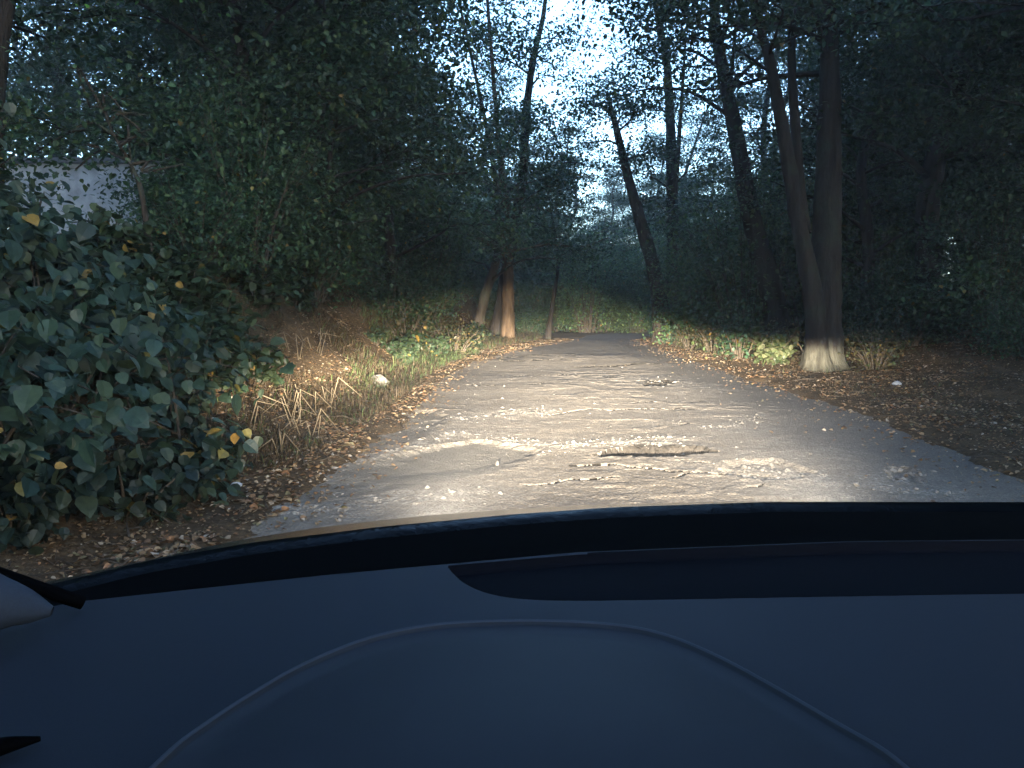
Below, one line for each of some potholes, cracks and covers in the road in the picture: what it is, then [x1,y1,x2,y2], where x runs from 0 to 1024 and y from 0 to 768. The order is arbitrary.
pothole [589,444,721,457]
pothole [879,465,928,483]
crack [517,462,726,485]
